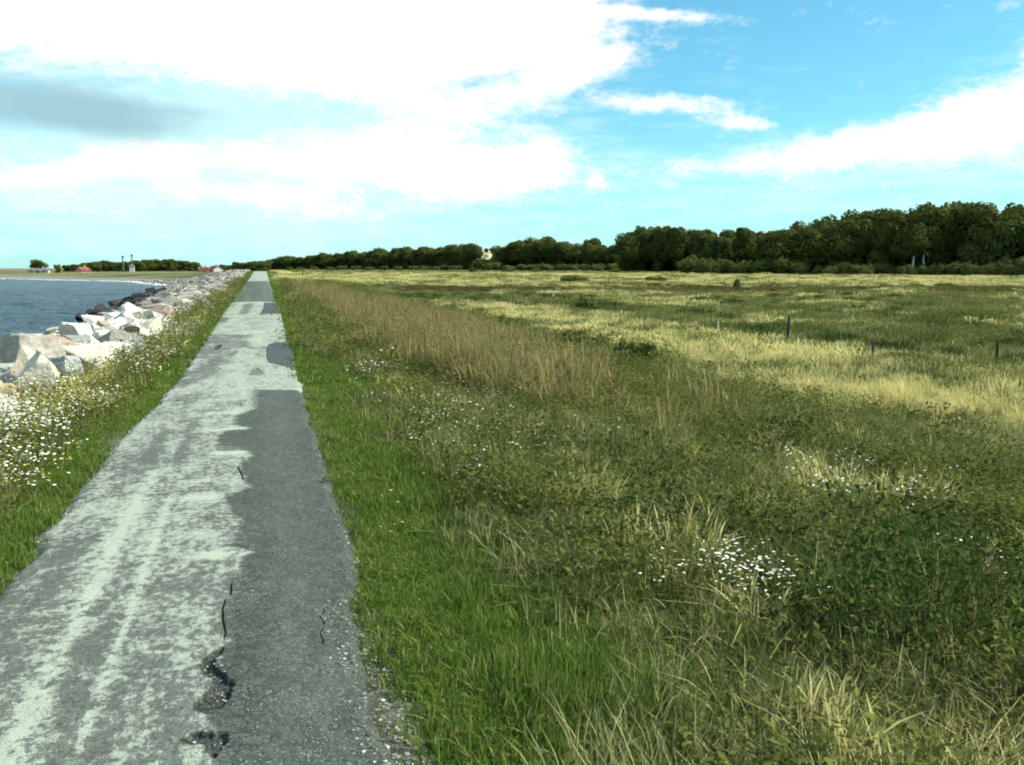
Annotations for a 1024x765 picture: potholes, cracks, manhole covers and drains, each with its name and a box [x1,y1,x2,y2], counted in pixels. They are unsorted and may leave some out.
pothole [167,725,246,764]
pothole [180,643,247,719]
crack [232,457,253,482]
crack [311,602,333,648]
